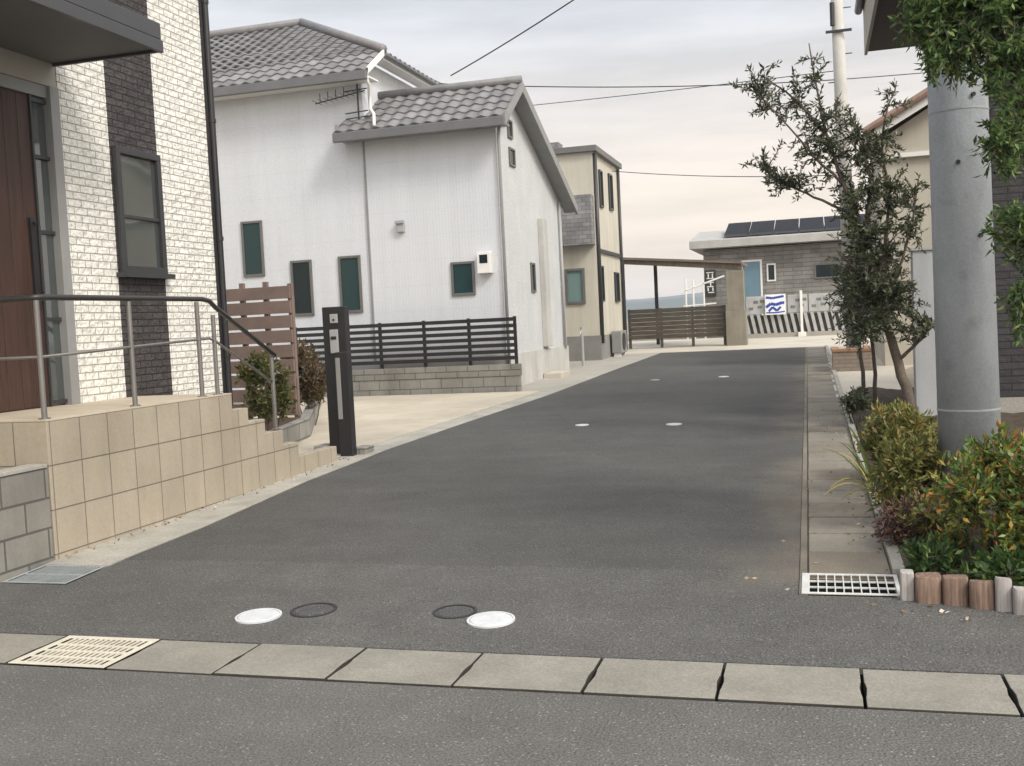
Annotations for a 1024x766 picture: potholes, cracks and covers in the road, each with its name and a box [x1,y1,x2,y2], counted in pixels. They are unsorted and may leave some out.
manhole cover [433,604,477,619]
manhole cover [467,611,515,629]
manhole cover [290,602,337,618]
drain grate [1,565,106,584]
drain grate [8,635,159,668]
drain grate [801,573,900,596]
manhole cover [235,608,282,624]
